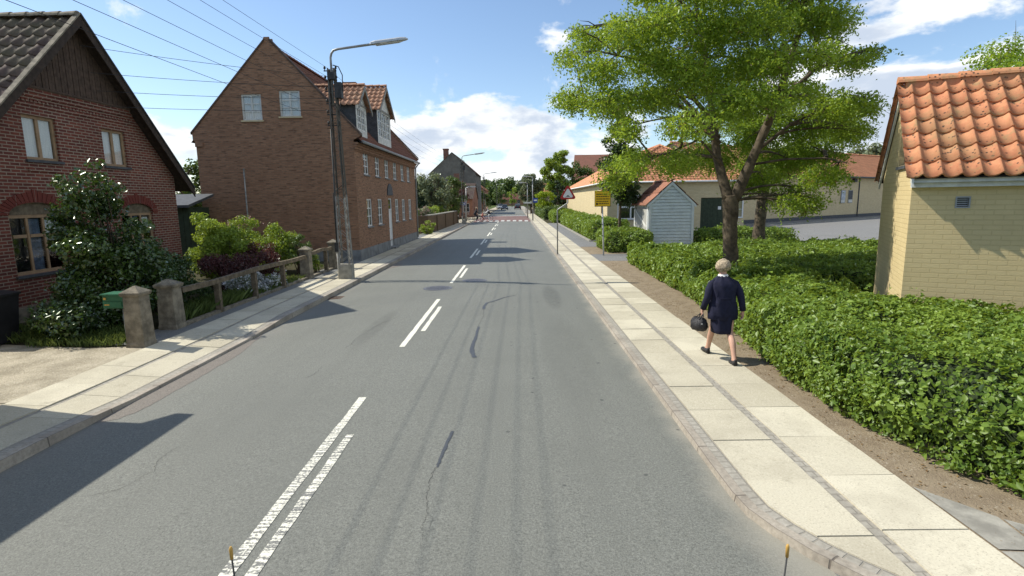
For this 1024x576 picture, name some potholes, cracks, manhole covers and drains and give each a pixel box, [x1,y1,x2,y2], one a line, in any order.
crack [421,431,454,537]
